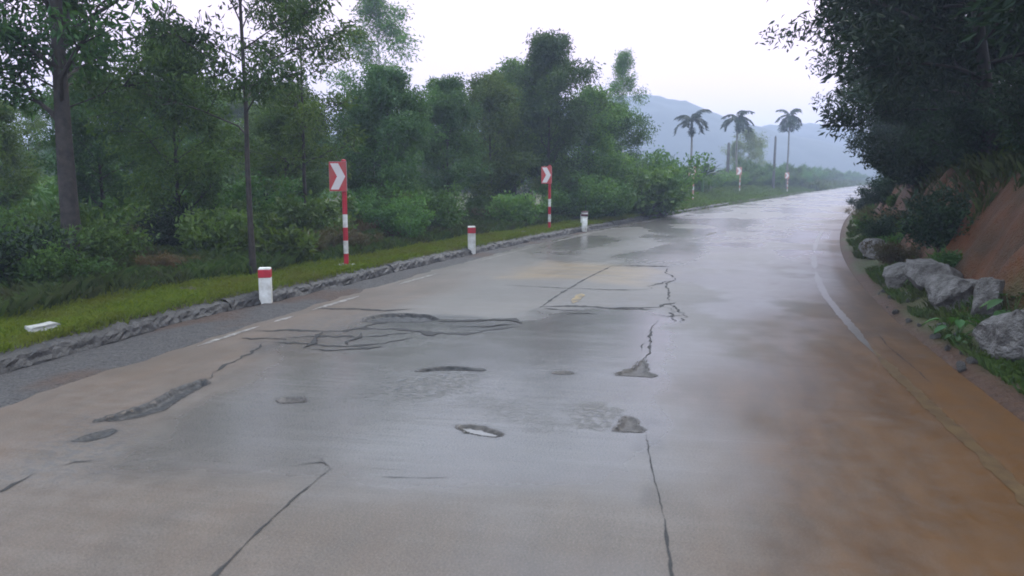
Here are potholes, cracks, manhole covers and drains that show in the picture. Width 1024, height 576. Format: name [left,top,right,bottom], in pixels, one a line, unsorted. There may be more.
crack [0,460,89,492]
pothole [611,416,648,433]
pothole [614,359,658,377]
crack [641,269,688,360]
pothole [455,424,505,437]
pothole [93,379,211,423]
crack [209,308,522,379]
pothole [71,428,117,442]
